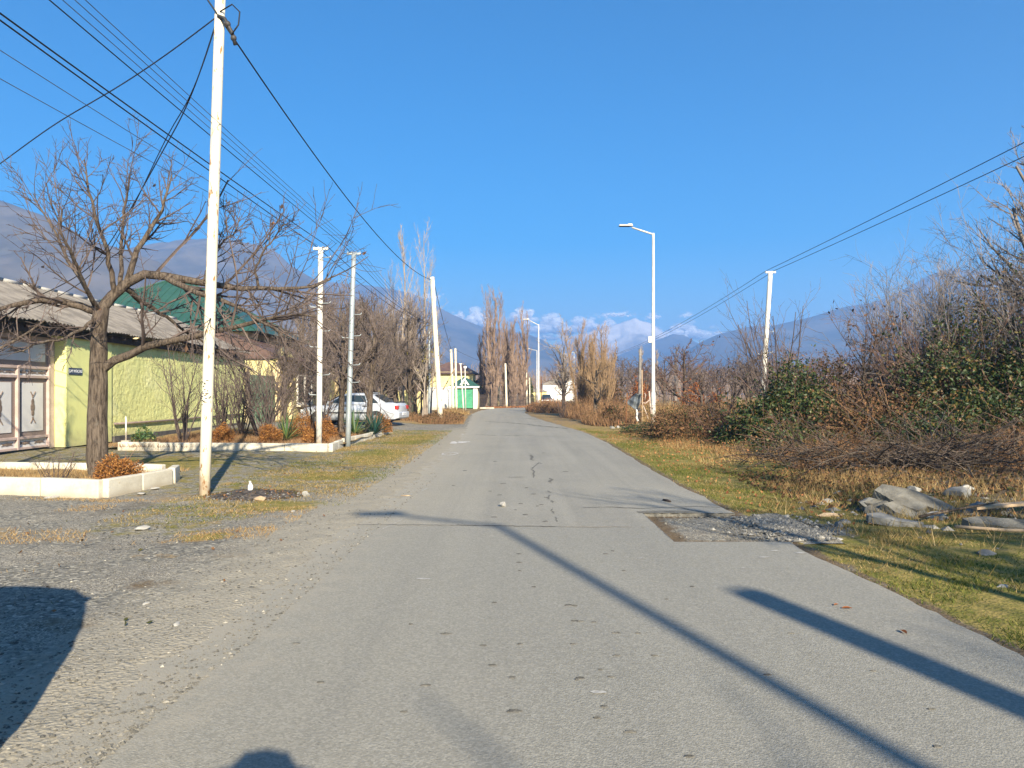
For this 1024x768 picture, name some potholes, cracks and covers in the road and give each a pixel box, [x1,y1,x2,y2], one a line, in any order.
pothole [637,510,854,544]
crack [530,455,629,527]
